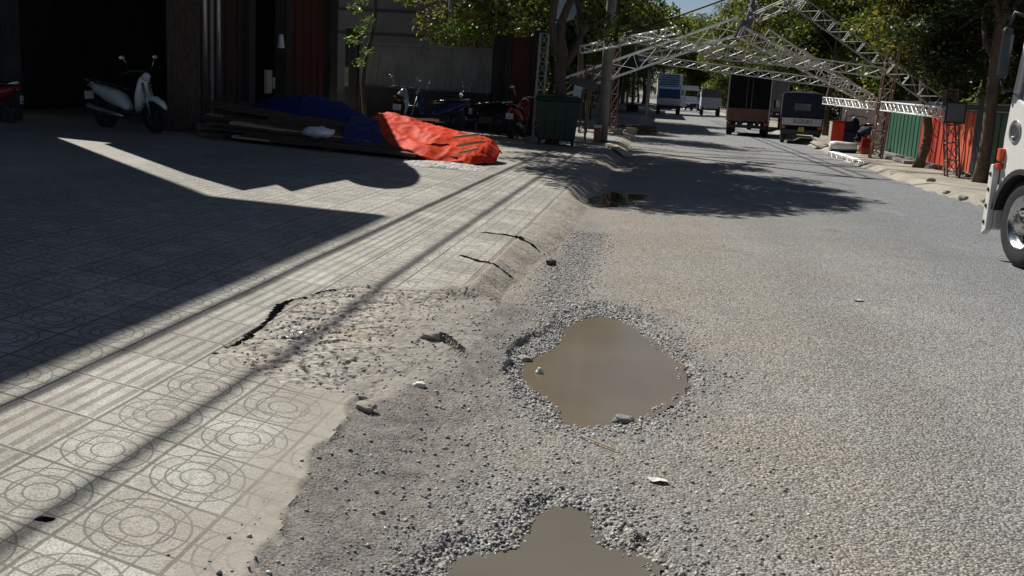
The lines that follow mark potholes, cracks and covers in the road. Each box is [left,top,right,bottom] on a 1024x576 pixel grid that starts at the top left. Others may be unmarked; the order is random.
crack [211,232,541,401]
pothole [435,331,469,357]
pothole [410,487,692,576]
pothole [502,302,705,432]
